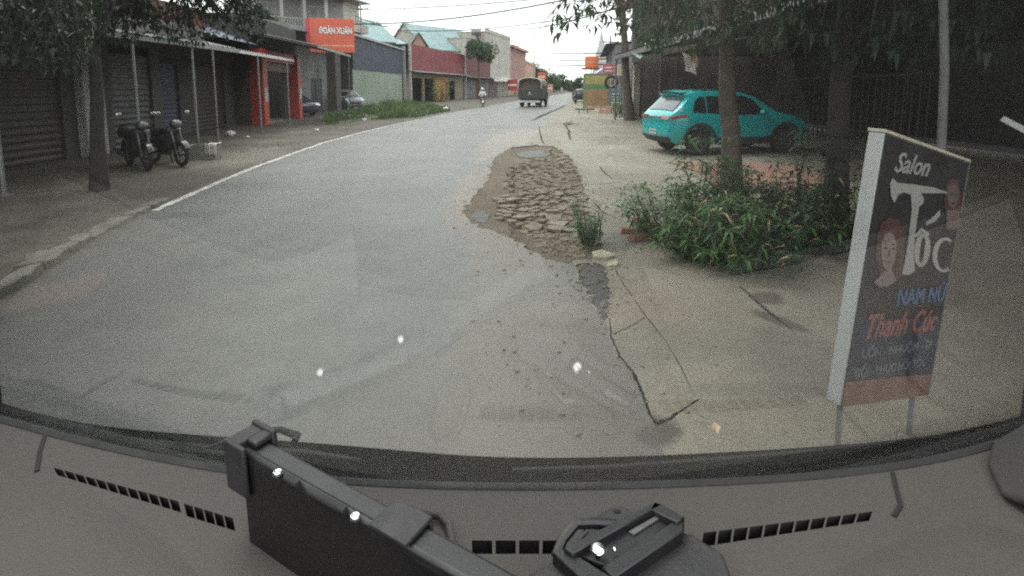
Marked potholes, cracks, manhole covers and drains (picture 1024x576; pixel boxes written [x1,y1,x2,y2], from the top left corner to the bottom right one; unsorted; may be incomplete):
crack [575,262,700,426]
crack [531,105,575,144]
pothole [462,145,604,264]
